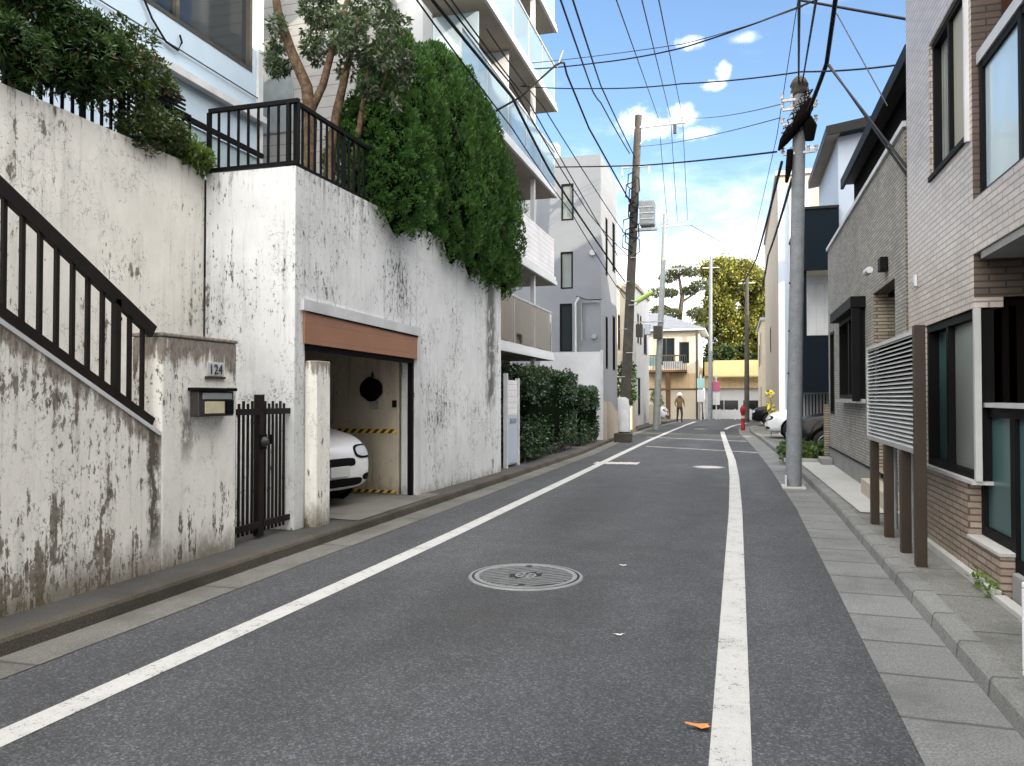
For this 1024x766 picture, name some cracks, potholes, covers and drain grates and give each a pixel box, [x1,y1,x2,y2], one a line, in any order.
manhole cover [468,563,583,591]
